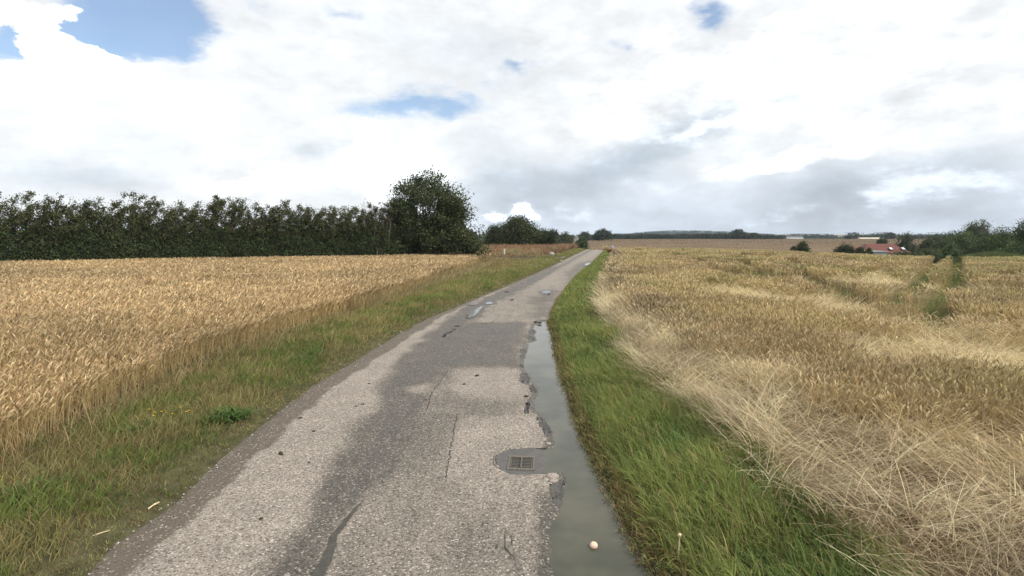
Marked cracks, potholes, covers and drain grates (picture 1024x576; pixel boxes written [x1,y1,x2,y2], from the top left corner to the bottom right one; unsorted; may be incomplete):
pothole [537,417,550,436]
